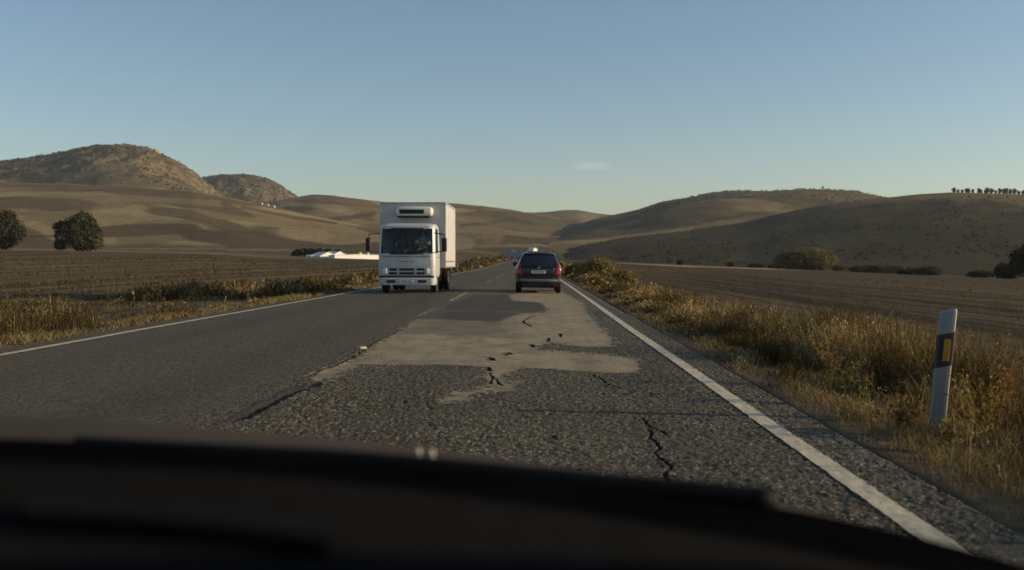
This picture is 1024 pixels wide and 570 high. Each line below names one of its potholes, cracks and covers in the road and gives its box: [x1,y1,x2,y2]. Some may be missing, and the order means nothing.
crack [517,315,539,327]
crack [588,374,624,389]
crack [637,418,680,478]
crack [483,371,509,386]
